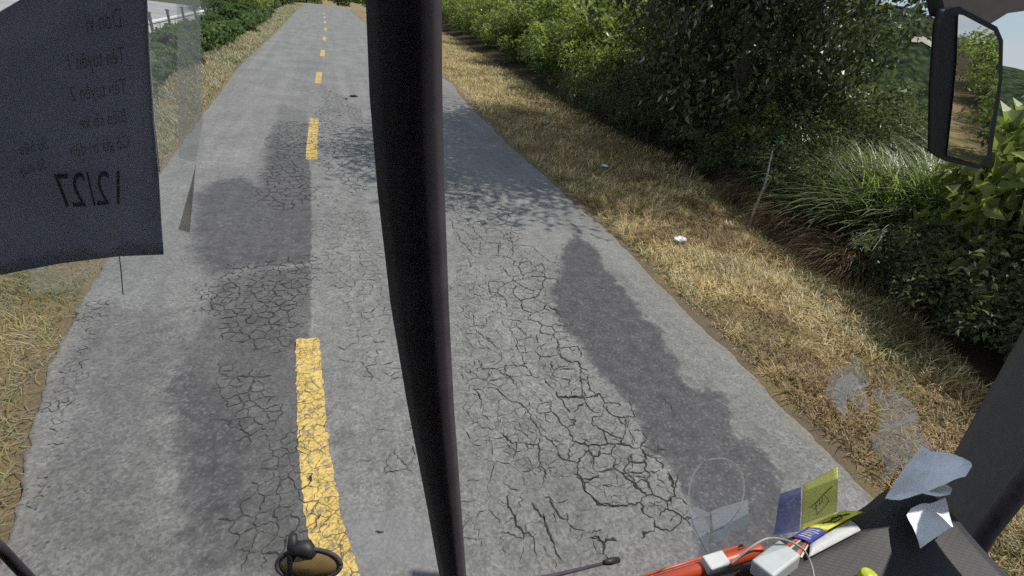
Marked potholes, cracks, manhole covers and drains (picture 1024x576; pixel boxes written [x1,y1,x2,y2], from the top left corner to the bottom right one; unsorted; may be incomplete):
crack [448,217,698,574]
crack [312,191,401,383]
crack [447,181,519,242]
crack [196,255,318,353]
crack [362,418,416,473]
crack [253,90,375,210]
crack [212,362,321,569]
